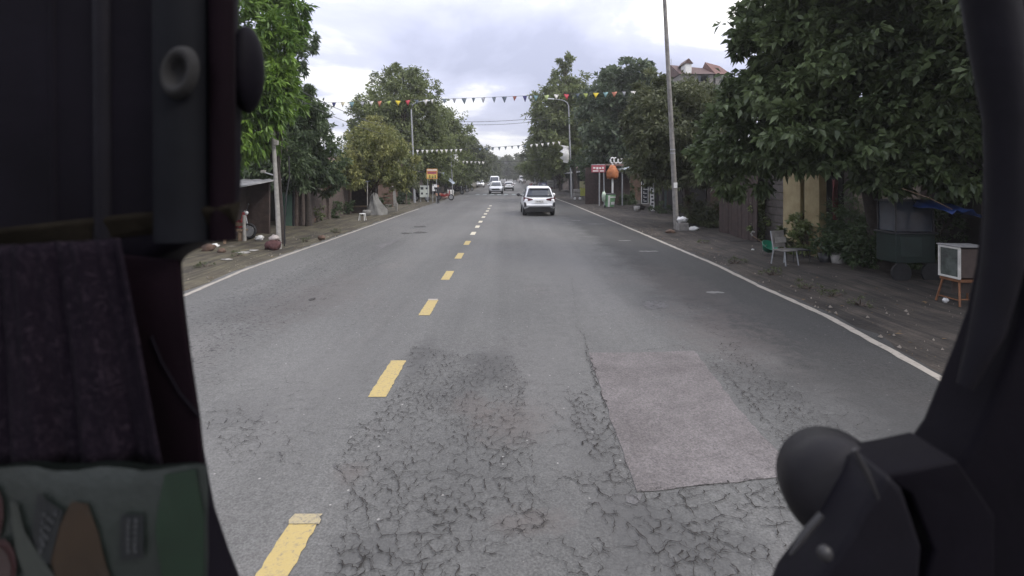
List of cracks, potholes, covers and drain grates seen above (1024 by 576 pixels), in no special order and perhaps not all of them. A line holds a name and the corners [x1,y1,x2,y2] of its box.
crack [326,331,802,576]
crack [206,374,321,474]
crack [613,304,877,441]
